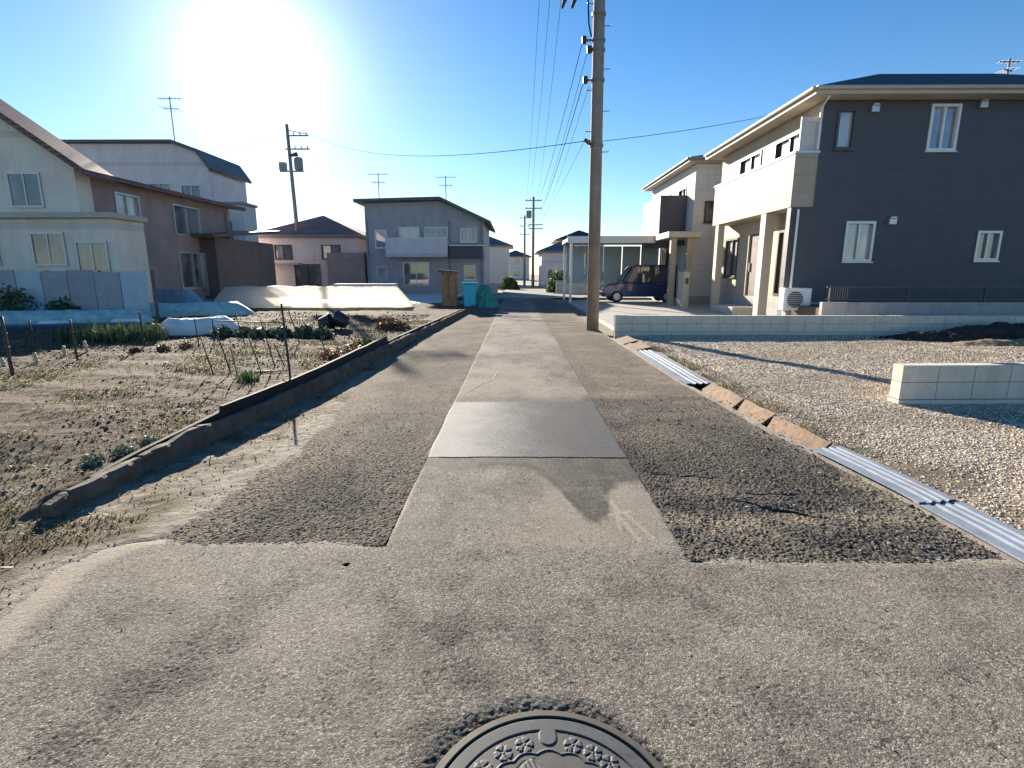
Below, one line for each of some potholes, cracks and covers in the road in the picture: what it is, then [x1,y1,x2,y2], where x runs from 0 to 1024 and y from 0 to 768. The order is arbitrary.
crack [726,494,826,519]
manhole cover [436,710,663,768]
